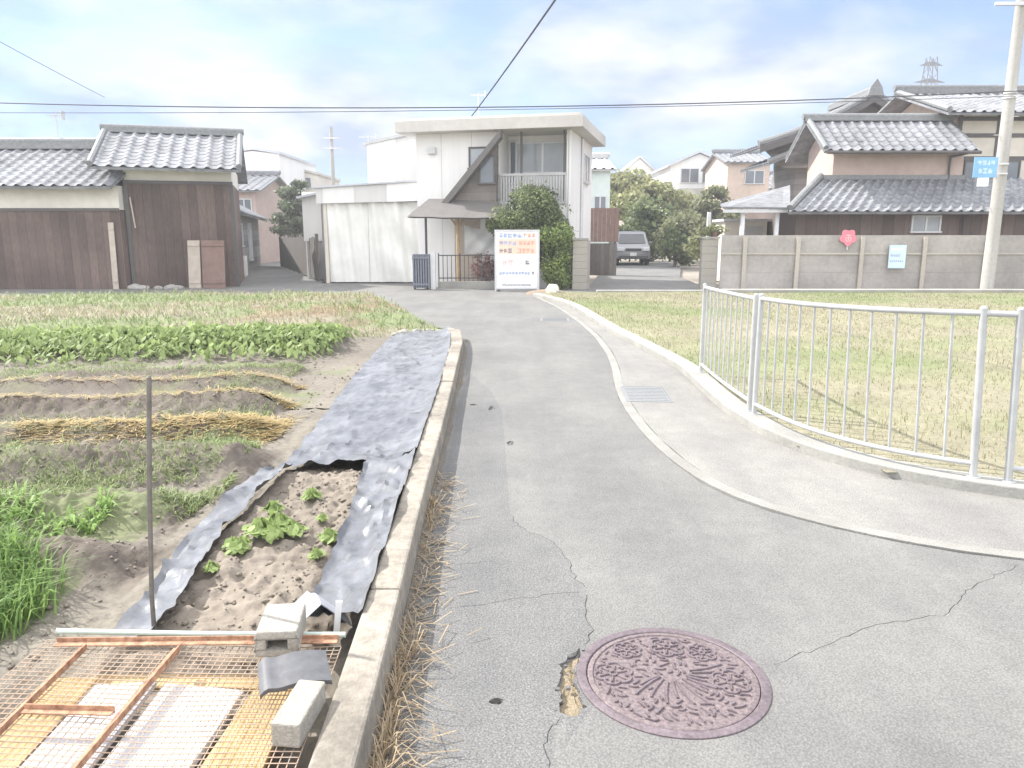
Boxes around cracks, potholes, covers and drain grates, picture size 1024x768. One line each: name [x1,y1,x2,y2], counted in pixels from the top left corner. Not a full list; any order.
crack [775,567,1015,665]
crack [455,515,595,767]
pothole [557,648,587,717]
manhole cover [576,628,772,740]
